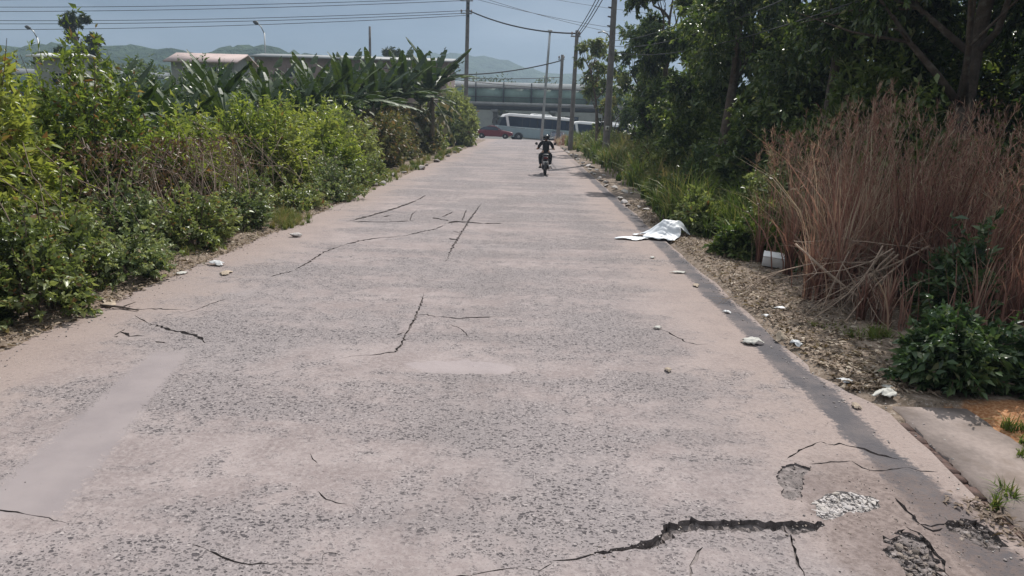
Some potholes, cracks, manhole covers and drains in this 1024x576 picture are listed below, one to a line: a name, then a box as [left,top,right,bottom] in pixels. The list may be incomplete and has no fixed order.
crack [345,295,489,358]
crack [895,498,949,576]
crack [193,544,340,565]
pothole [776,462,811,501]
crack [271,196,501,277]
crack [112,298,229,343]
crack [0,510,66,523]
pothole [880,529,943,576]
crack [788,442,934,472]
